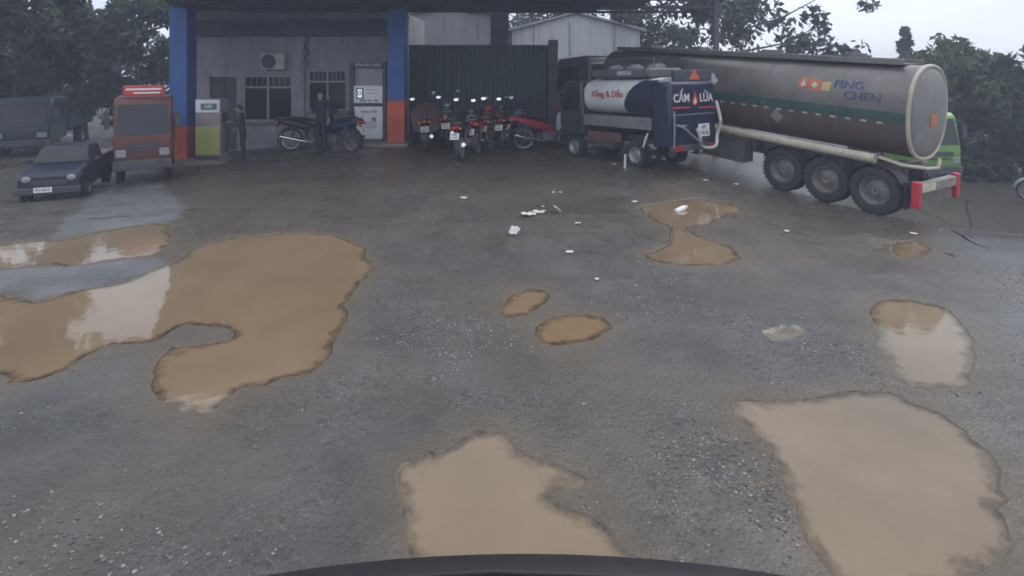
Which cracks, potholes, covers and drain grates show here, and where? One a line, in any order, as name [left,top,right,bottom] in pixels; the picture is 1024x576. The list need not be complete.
pothole [534,313,613,346]
pothole [396,430,644,558]
pothole [0,223,172,270]
pothole [729,390,1016,576]
pothole [889,240,933,258]
pothole [763,324,805,341]
pothole [868,299,977,389]
crack [920,198,989,257]
pothole [638,197,744,265]
pothole [0,232,375,415]
pothole [499,288,550,318]
